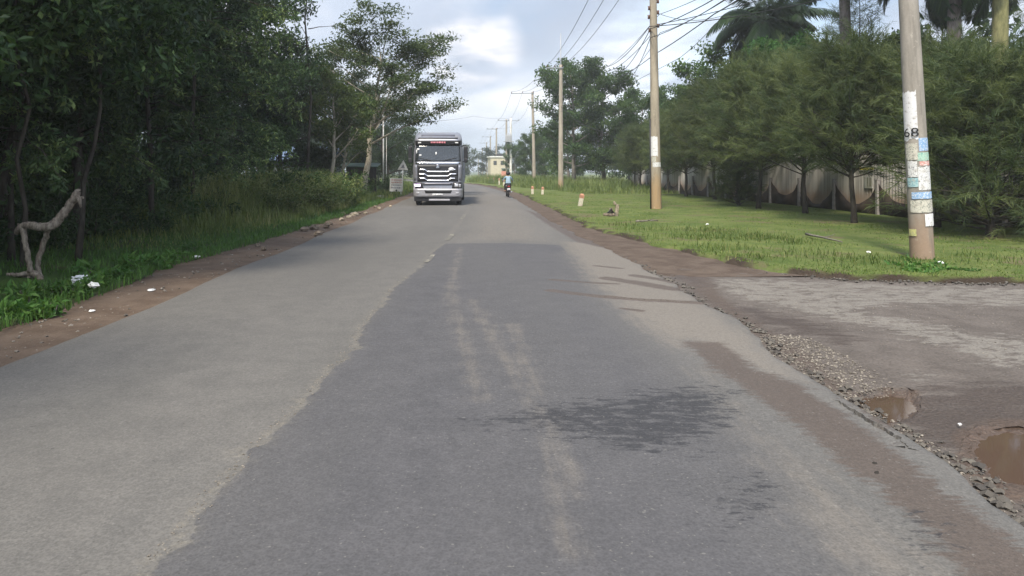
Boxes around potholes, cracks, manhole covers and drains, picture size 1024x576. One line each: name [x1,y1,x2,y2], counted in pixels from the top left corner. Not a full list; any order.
pothole [958,422,1024,500]
pothole [846,385,928,426]
